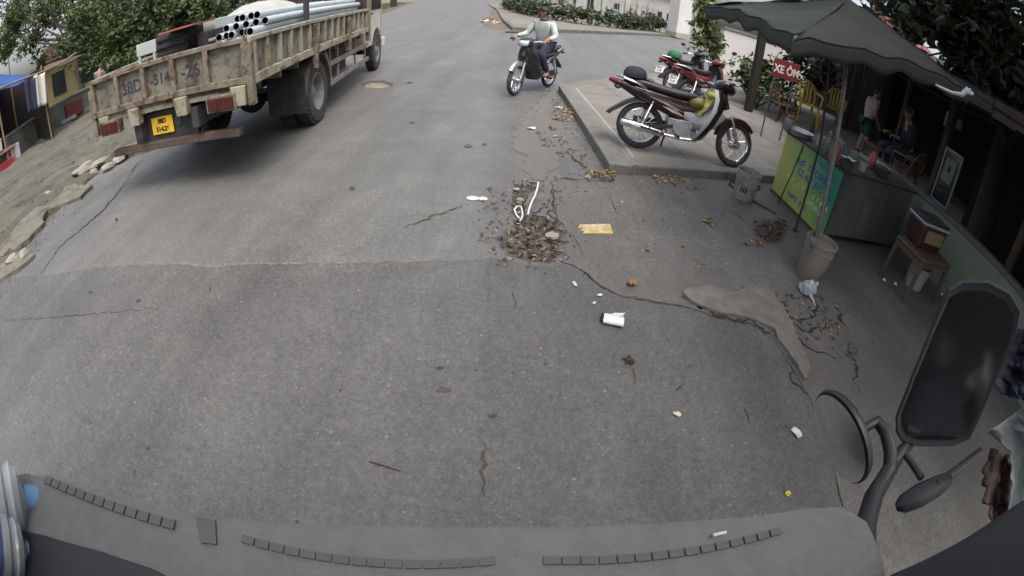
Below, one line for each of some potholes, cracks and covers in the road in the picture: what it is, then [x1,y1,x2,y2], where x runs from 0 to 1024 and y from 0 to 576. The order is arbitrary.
crack [404,206,461,228]
pothole [500,214,565,263]
crack [4,308,155,321]
crack [478,442,488,497]
crack [41,162,139,273]
crack [781,295,860,395]
pothole [510,182,537,215]
